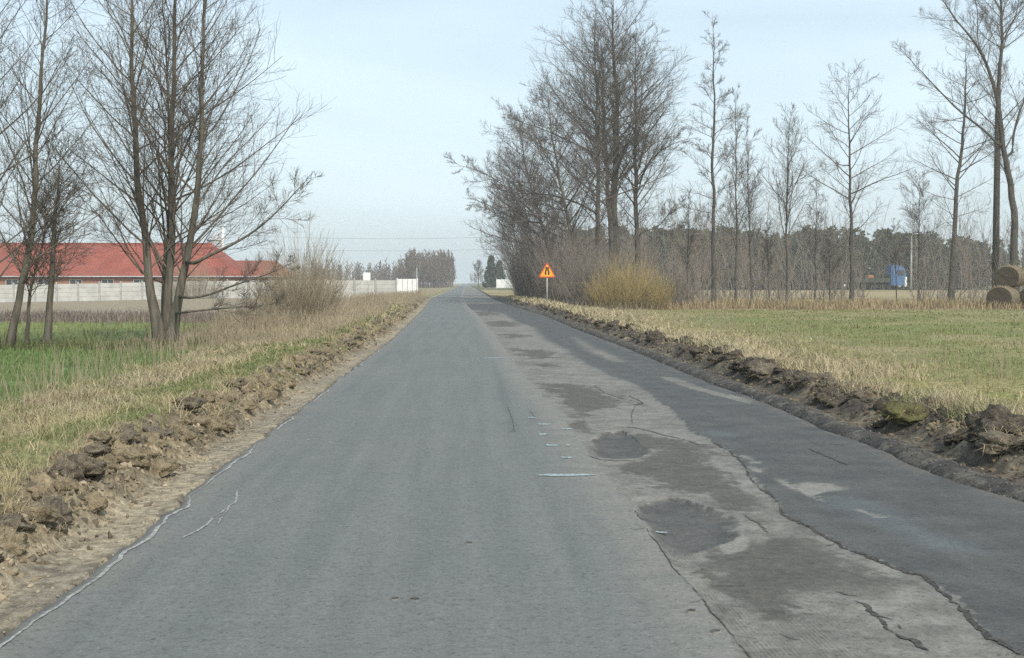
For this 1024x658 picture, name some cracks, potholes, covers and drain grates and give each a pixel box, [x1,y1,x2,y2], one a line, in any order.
crack [594,385,1024,655]
crack [180,490,239,539]
